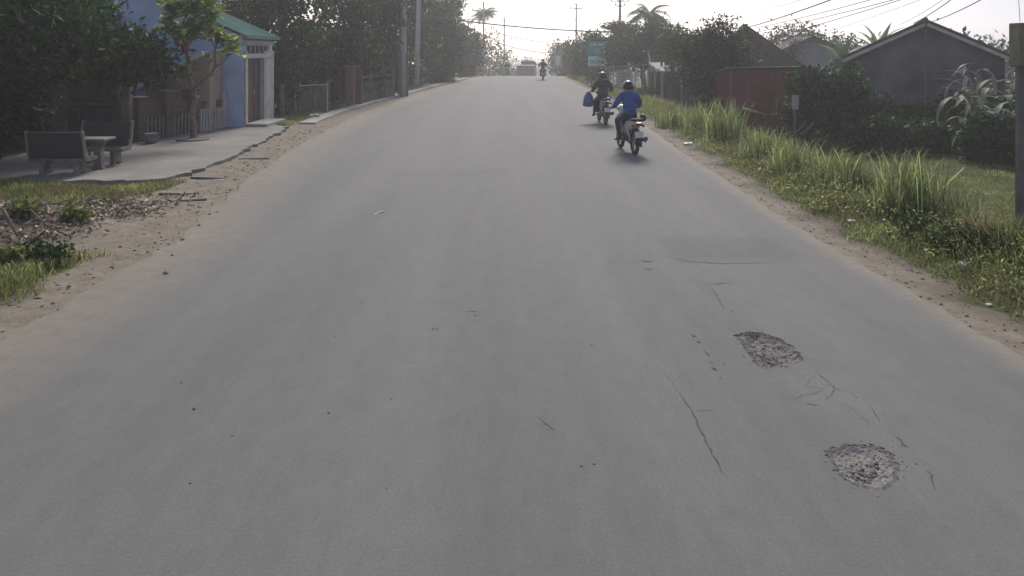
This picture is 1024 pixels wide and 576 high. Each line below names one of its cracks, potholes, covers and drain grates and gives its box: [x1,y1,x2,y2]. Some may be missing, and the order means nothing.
pothole [729,327,811,377]
pothole [808,437,917,497]
crack [664,371,726,478]
